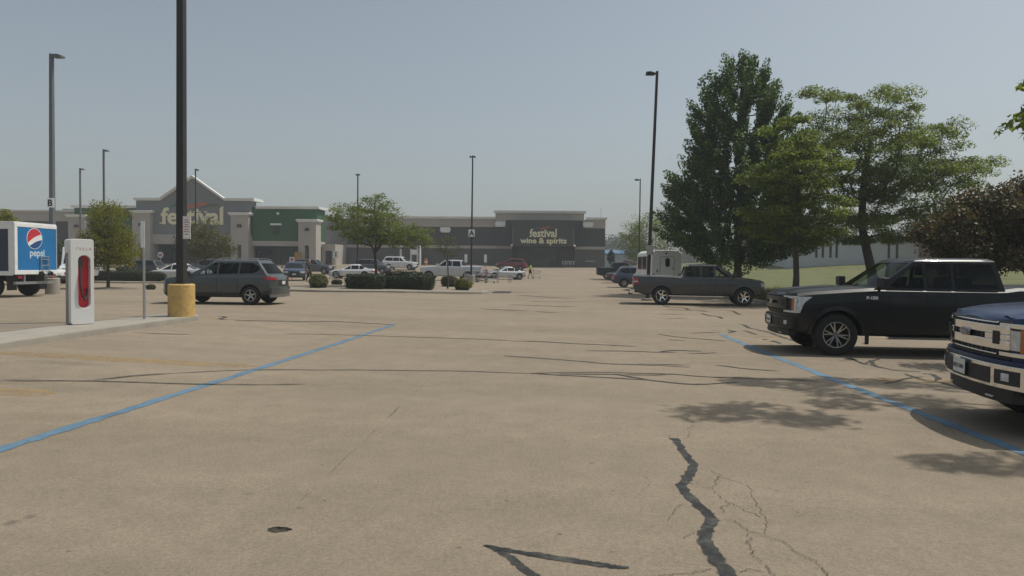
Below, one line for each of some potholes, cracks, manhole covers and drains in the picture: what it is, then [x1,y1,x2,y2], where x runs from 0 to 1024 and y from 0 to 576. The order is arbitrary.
crack [645,471,829,576]
